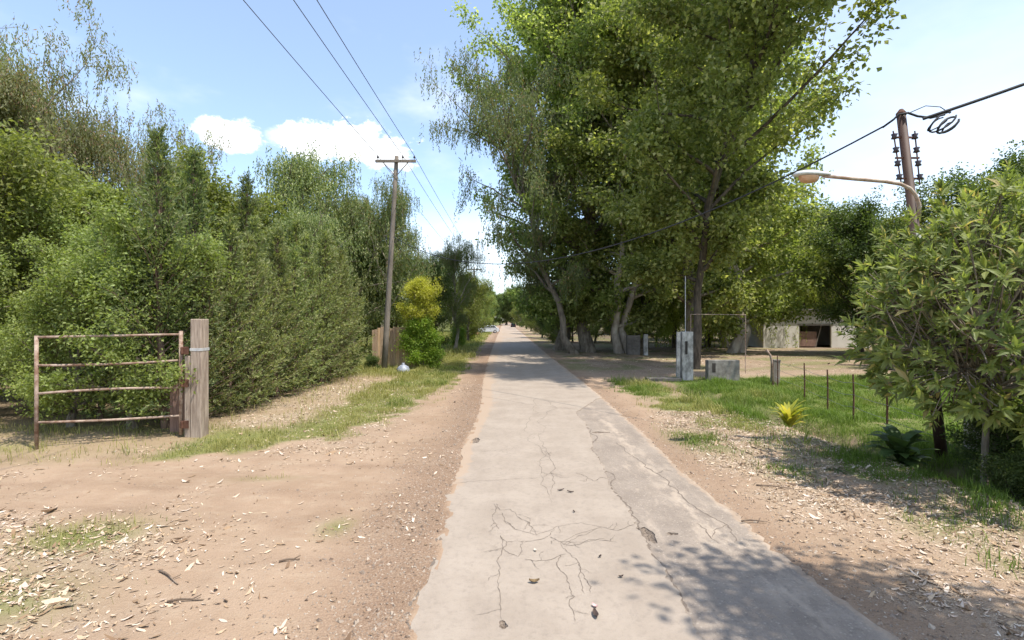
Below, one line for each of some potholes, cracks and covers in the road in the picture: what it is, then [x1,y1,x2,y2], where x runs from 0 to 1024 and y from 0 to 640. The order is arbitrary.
crack [616,443,737,541]
crack [482,396,569,492]
pothole [637,527,657,544]
crack [581,429,689,612]
crack [477,504,634,619]
